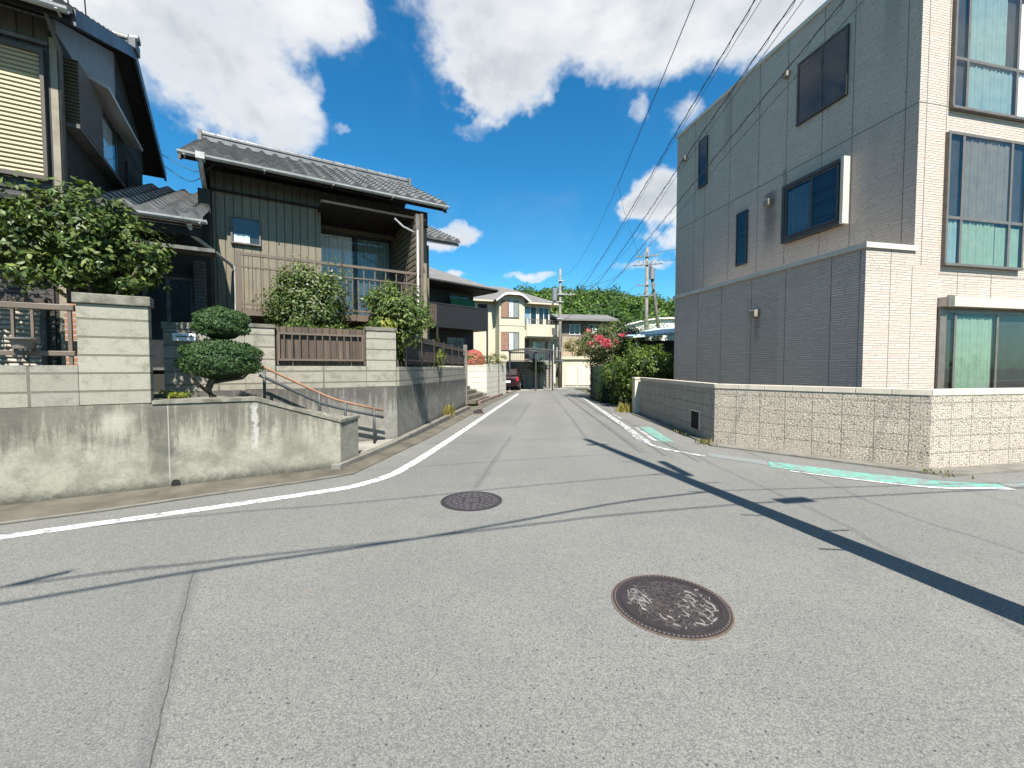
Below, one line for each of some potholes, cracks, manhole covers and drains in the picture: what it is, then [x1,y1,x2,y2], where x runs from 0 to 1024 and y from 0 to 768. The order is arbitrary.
crack [149,571,194,768]
manhole cover [441,491,502,511]
manhole cover [611,575,735,641]
